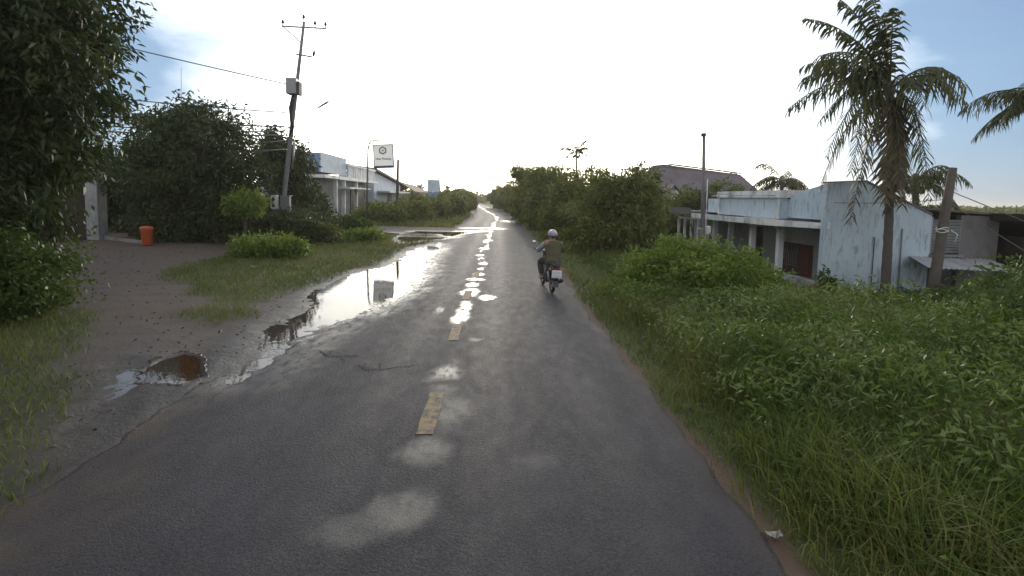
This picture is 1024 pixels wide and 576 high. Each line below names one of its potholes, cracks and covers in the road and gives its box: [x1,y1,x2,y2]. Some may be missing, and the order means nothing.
pothole [134,350,210,386]
crack [319,350,412,370]
